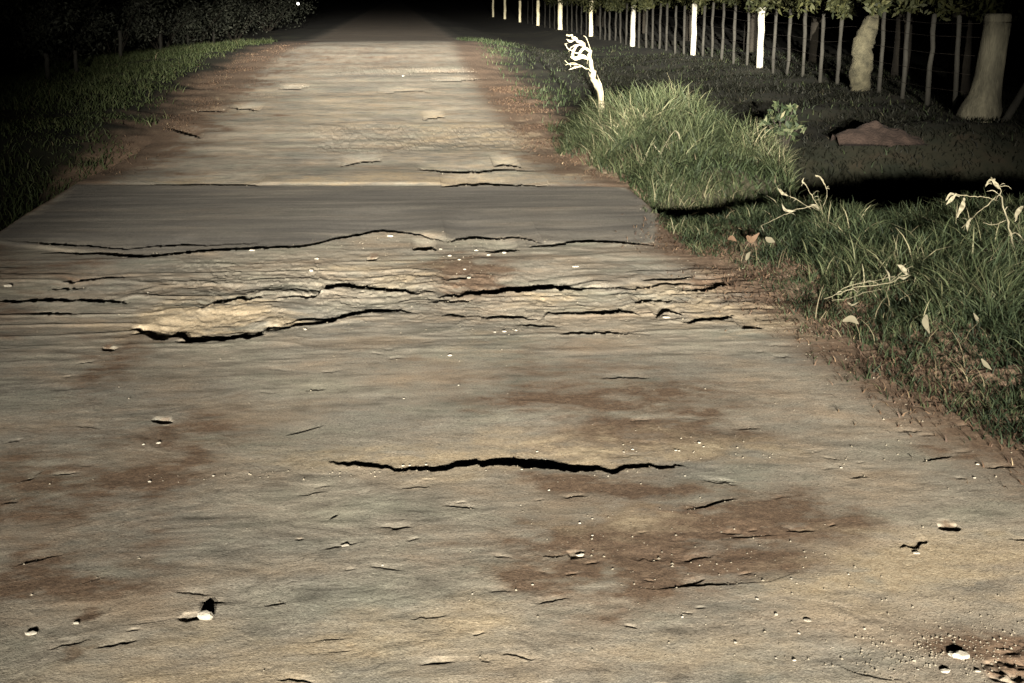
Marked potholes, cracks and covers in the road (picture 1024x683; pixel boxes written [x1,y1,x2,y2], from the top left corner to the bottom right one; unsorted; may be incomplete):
crack [3,281,132,315]
crack [329,459,689,475]
crack [631,572,798,590]
pothole [177,605,219,622]
crack [9,227,658,259]
crack [195,274,736,335]
